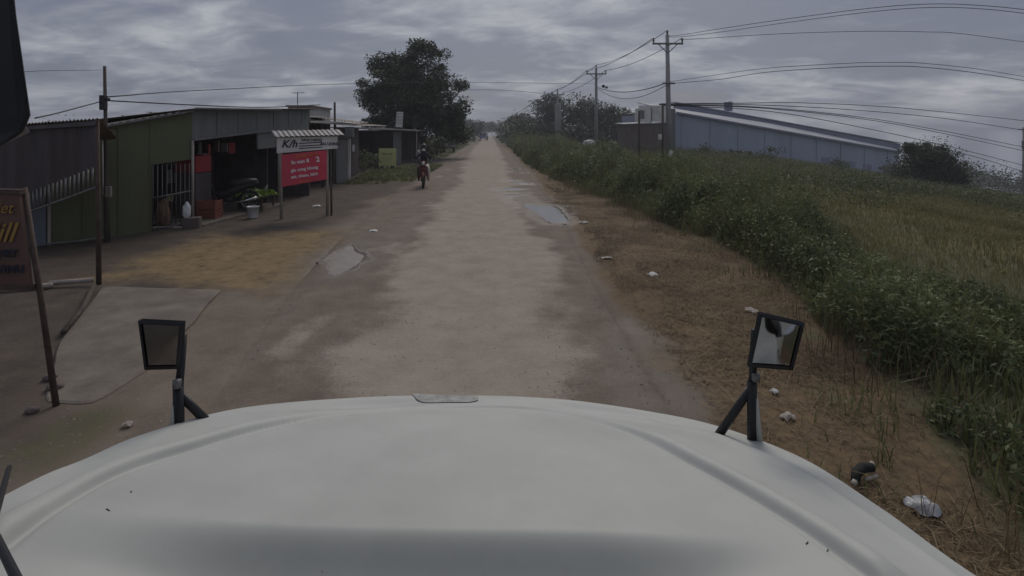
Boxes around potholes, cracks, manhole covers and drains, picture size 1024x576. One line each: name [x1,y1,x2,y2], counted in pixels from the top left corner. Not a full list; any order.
pothole [521,204,571,224]
pothole [316,243,375,278]
